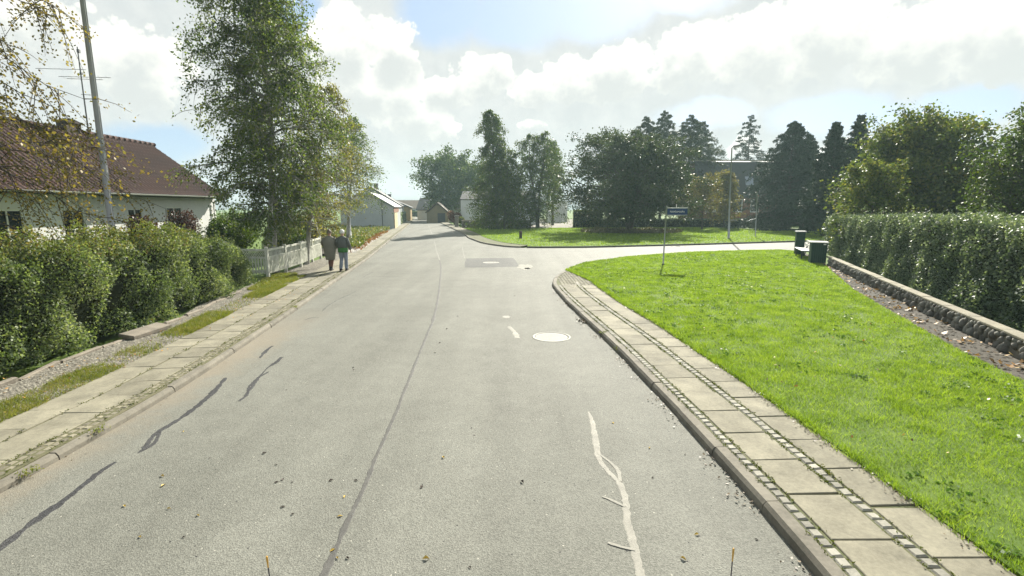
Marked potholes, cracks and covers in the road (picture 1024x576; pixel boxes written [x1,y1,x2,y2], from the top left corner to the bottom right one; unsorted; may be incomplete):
manhole cover [532,332,571,342]
